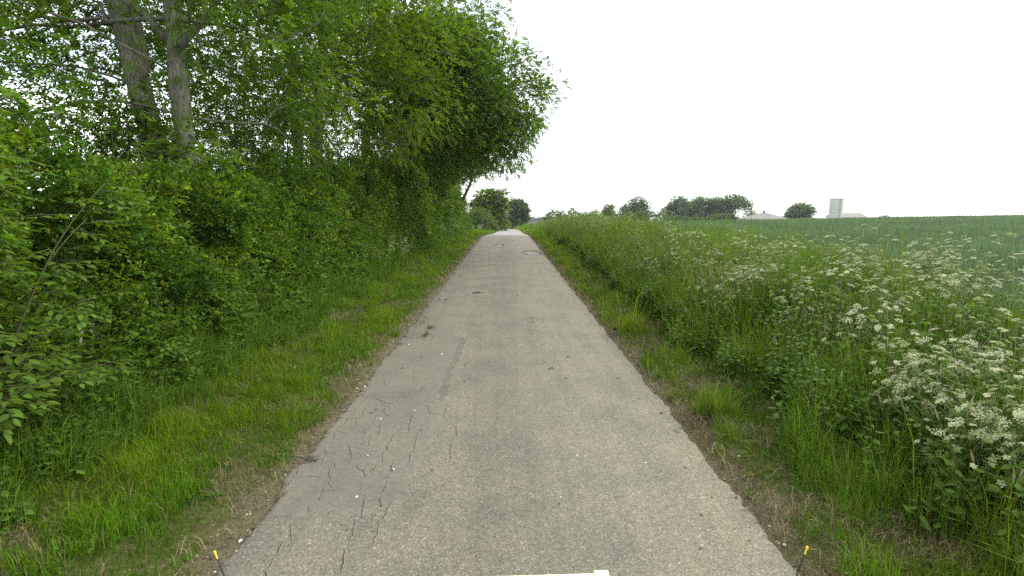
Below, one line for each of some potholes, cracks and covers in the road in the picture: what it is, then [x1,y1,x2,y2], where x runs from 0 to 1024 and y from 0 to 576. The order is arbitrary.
crack [263,369,458,576]
